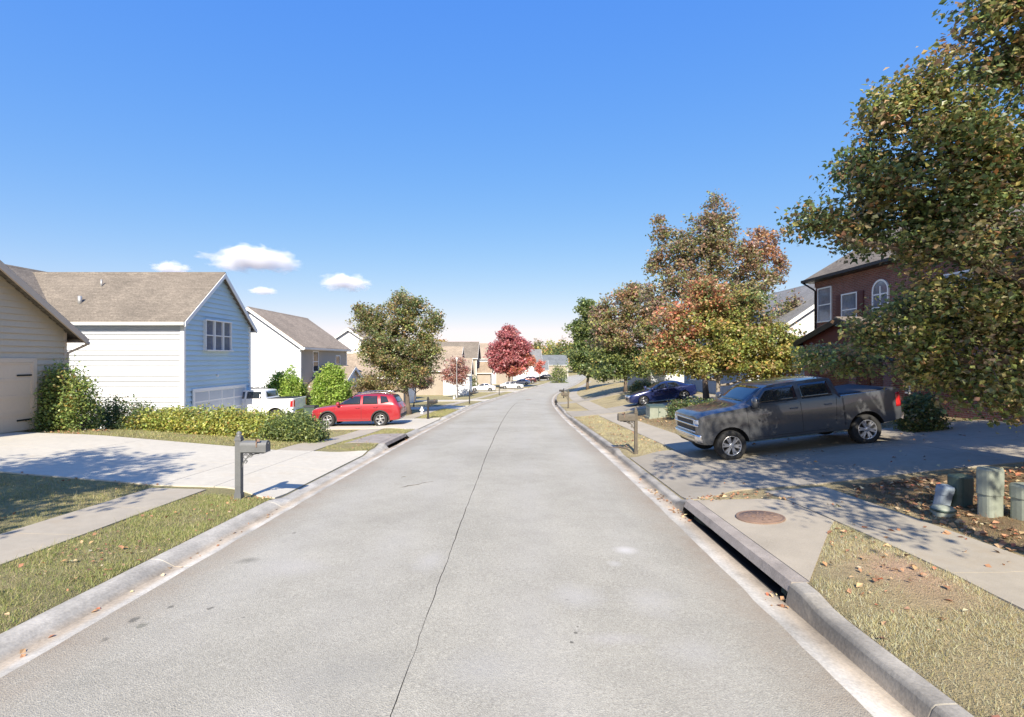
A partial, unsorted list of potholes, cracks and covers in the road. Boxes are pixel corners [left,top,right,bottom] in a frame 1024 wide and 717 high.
manhole cover [736,510,786,525]
crack [390,402,518,717]
drain grate [683,499,834,603]
